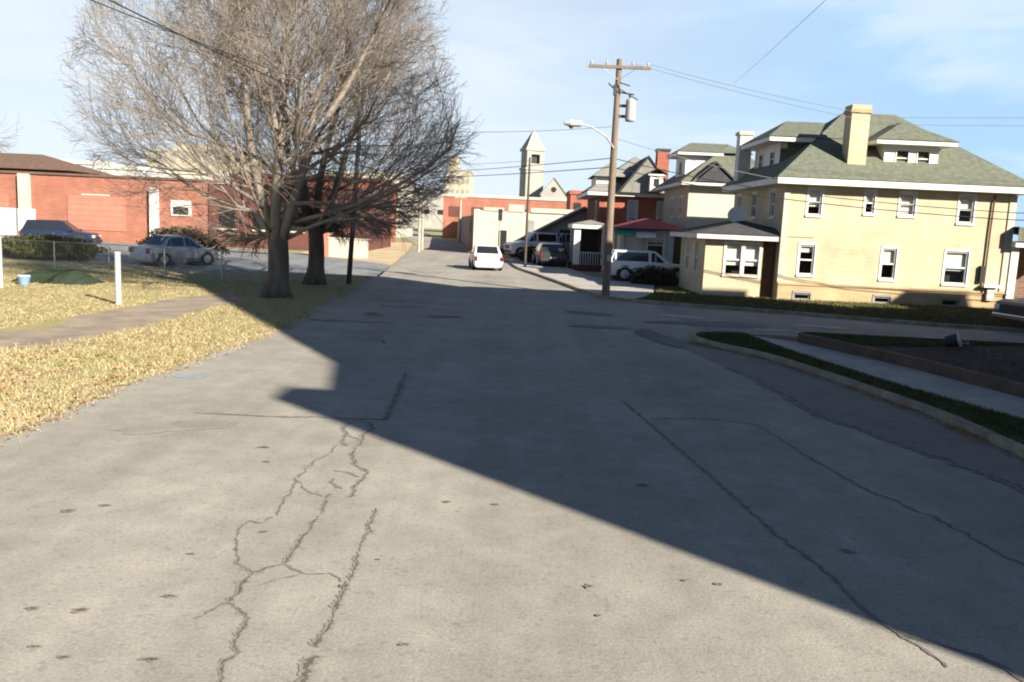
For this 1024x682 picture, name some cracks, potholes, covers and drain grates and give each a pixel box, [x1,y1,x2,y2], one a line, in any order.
crack [194,421,380,682]
crack [621,366,1024,682]
